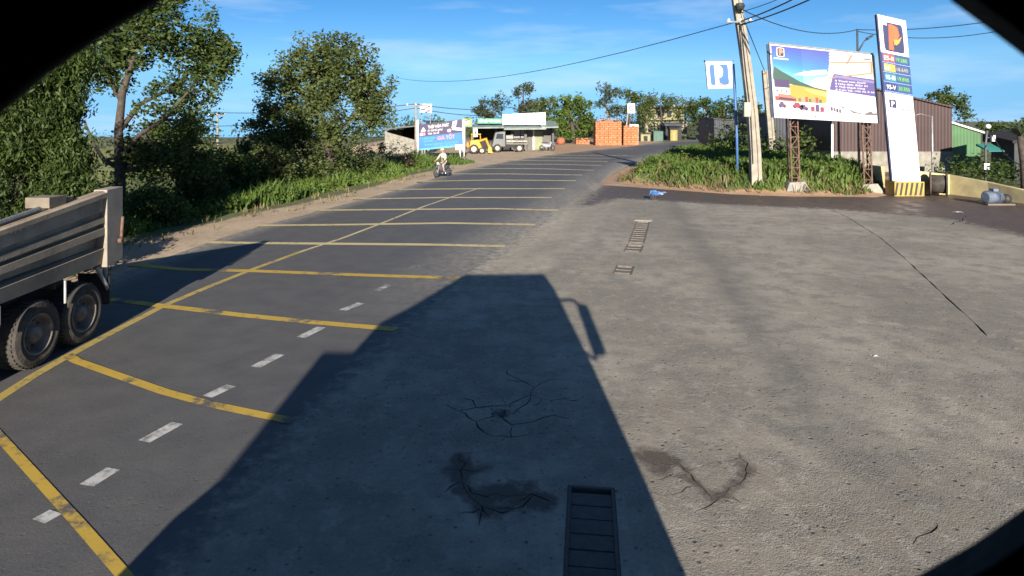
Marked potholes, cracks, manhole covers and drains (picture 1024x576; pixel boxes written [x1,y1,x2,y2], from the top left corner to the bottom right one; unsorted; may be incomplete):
crack [448,372,576,438]
drain grate [623,244,644,252]
crack [912,525,938,544]
drain grate [628,219,652,244]
crack [647,452,760,511]
drain grate [564,485,621,576]
drain grate [612,265,635,275]
